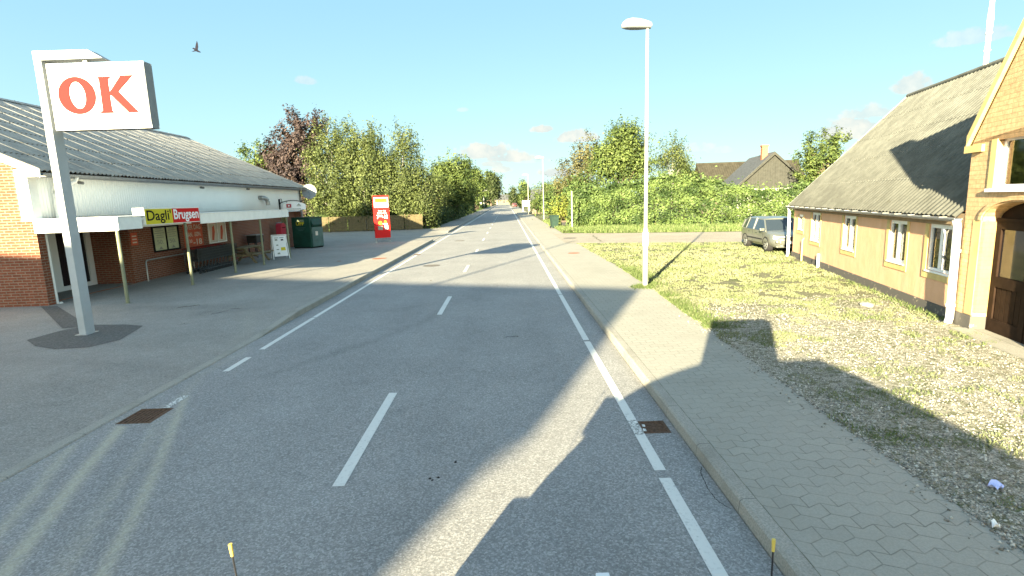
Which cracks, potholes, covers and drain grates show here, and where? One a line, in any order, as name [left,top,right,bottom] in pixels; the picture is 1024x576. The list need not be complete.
drain grate [116,408,173,424]
drain grate [637,420,672,434]
